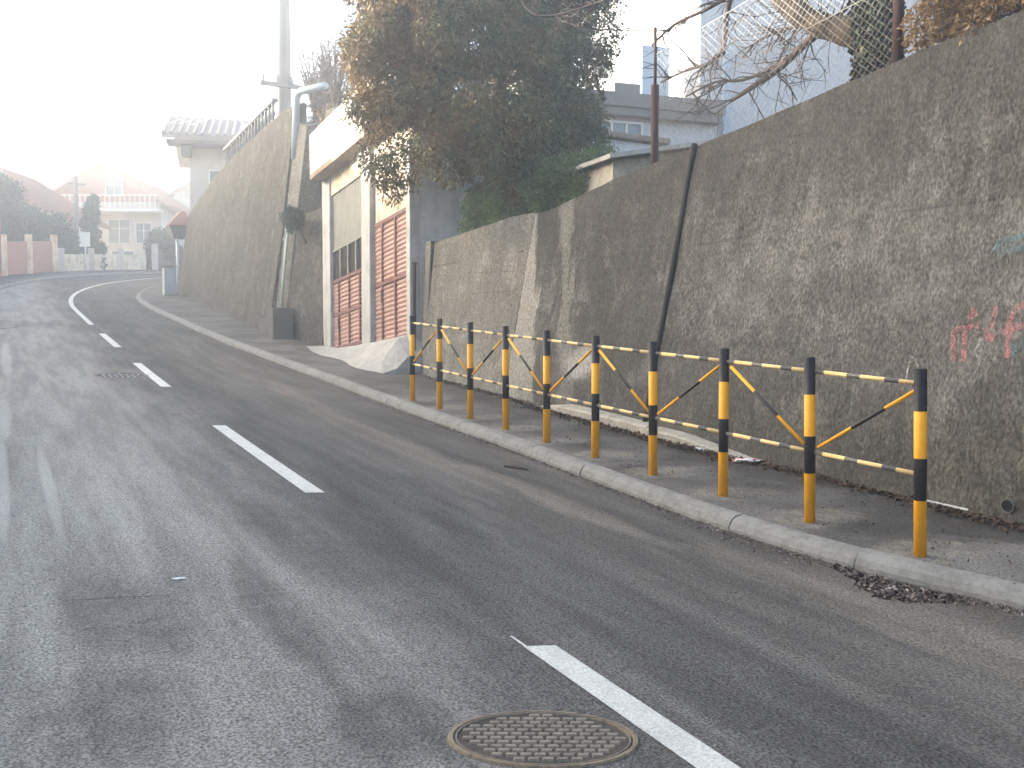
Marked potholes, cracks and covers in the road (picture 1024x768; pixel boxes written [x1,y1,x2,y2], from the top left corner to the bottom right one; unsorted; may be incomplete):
pothole [830,564,968,603]
manhole cover [447,710,639,768]
